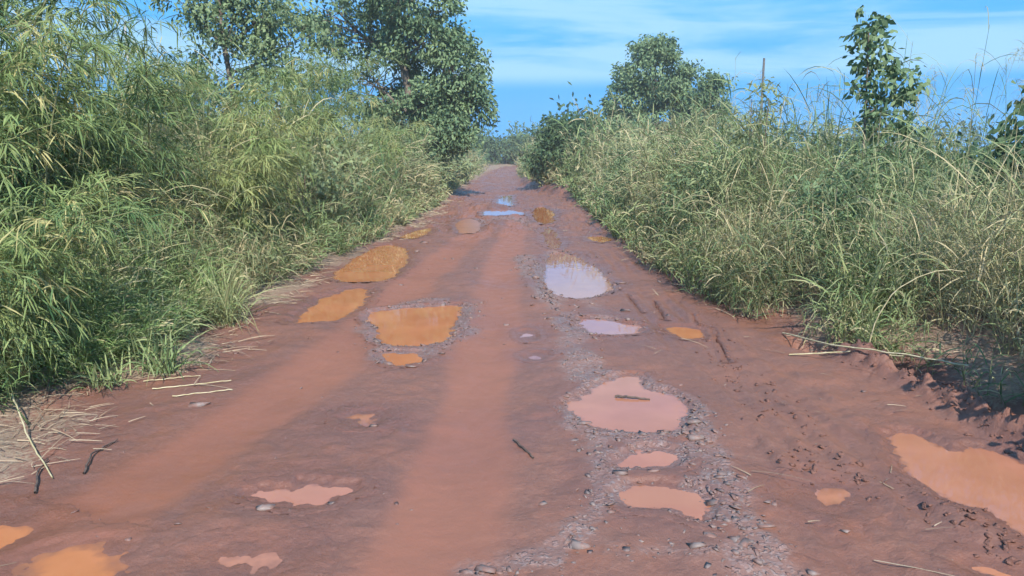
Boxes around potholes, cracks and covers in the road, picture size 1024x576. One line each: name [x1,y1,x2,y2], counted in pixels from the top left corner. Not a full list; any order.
pothole [589,471,740,530]
pothole [352,300,477,348]
pothole [592,436,704,475]
pothole [220,469,380,516]
pothole [864,420,1024,549]
pothole [0,521,169,576]
pothole [525,204,562,225]
pothole [277,284,383,325]
pothole [564,313,658,337]
pothole [533,249,627,299]
